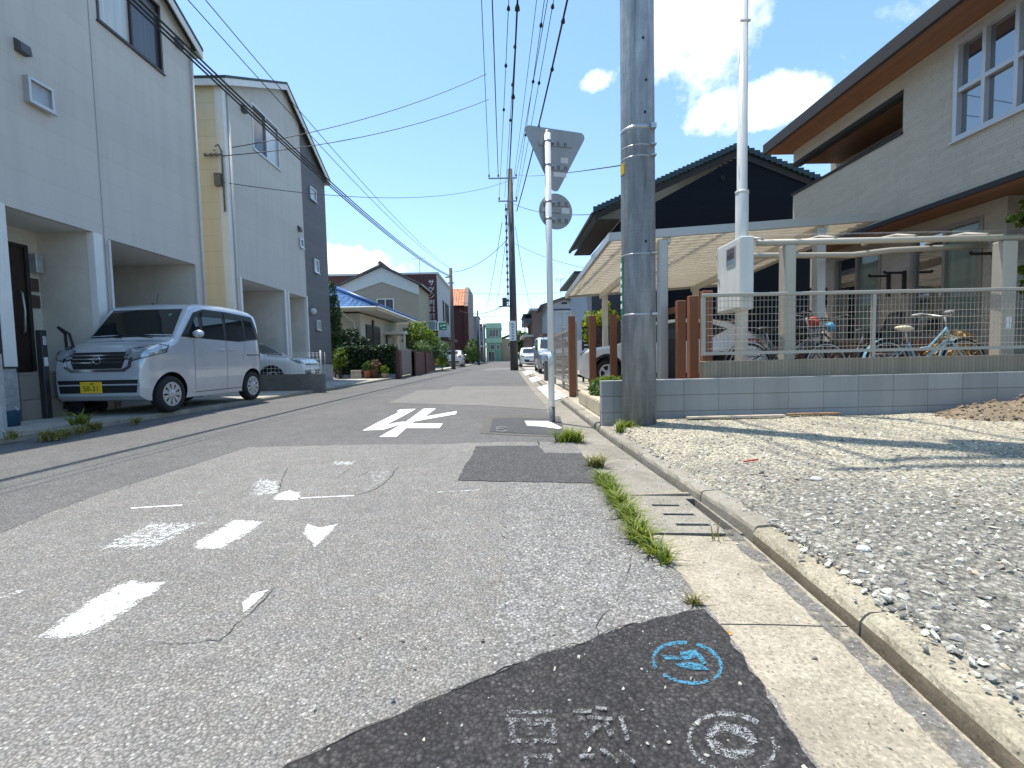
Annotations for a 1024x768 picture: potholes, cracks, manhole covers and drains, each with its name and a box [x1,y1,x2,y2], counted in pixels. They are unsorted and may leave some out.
crack [153,585,276,644]
crack [288,556,642,762]
